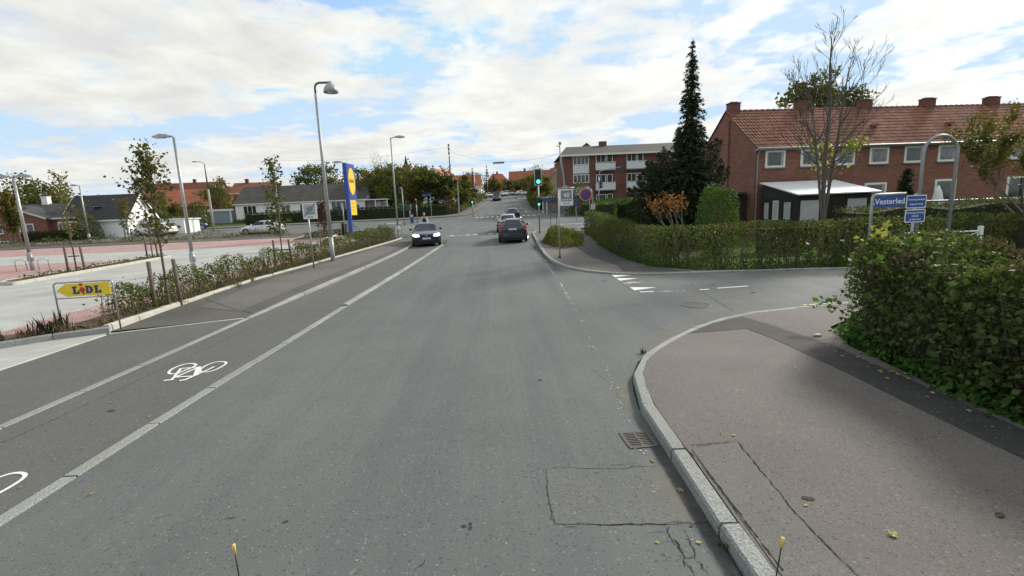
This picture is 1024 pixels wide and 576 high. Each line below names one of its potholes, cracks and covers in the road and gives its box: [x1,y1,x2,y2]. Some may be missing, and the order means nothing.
crack [546,462,709,574]
drain grate [619,430,659,449]
